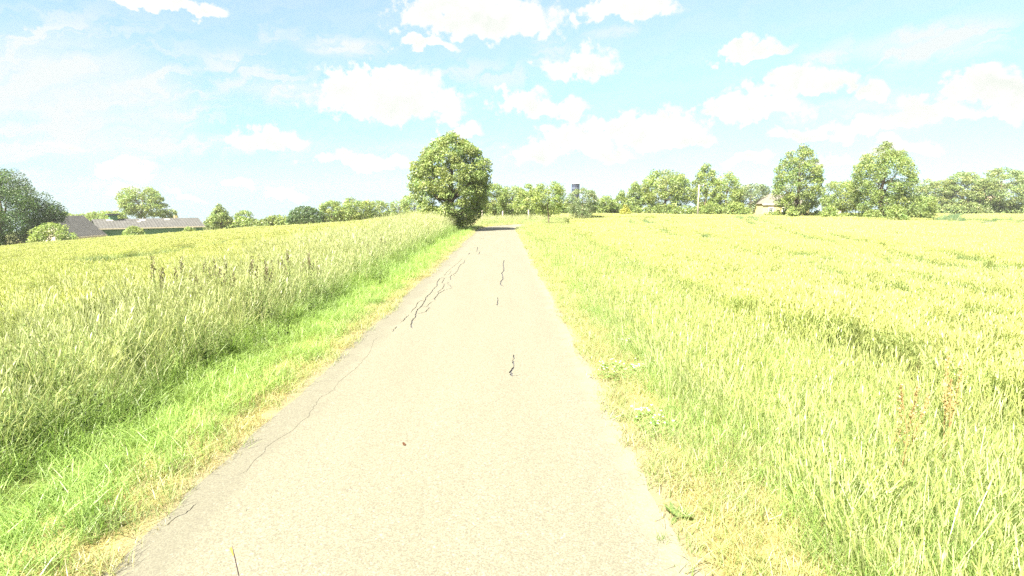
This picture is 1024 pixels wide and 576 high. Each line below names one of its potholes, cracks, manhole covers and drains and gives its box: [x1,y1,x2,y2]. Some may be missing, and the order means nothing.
crack [393,247,480,331]
crack [243,335,378,473]
